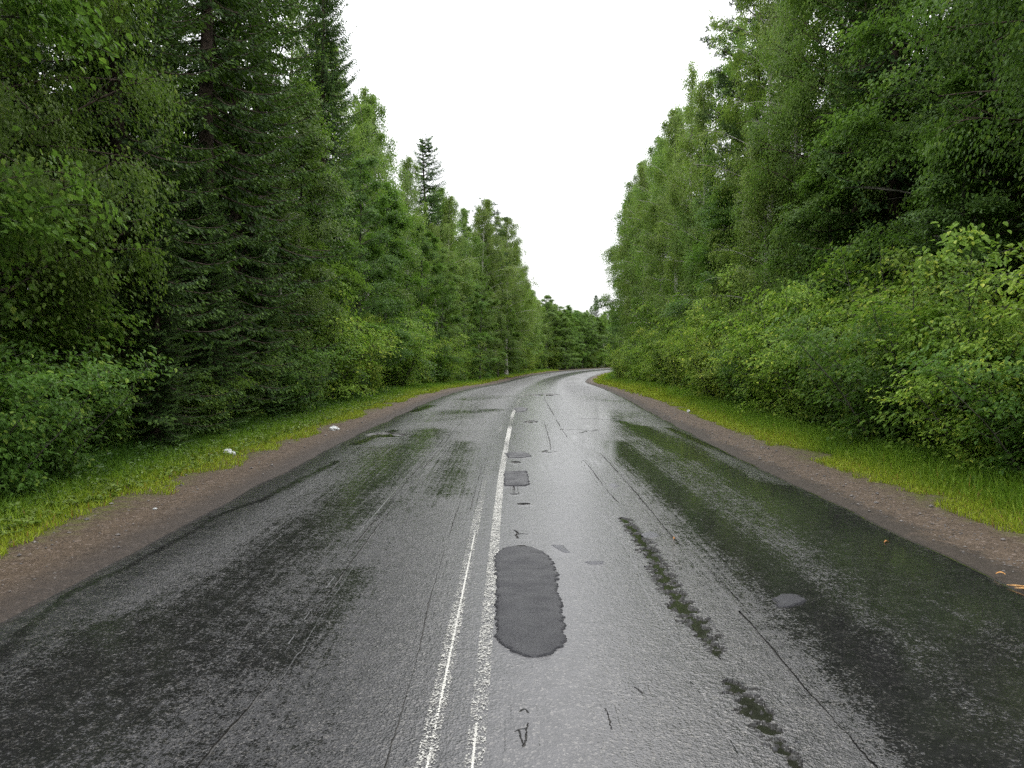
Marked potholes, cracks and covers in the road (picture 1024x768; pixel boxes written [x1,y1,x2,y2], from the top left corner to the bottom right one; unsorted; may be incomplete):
crack [504,705,540,752]
crack [542,395,638,453]
